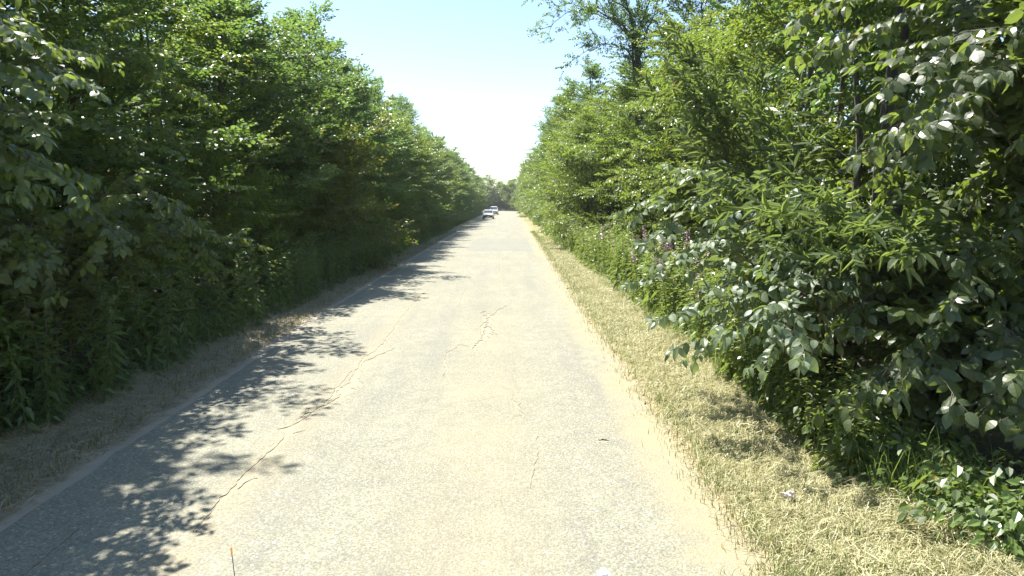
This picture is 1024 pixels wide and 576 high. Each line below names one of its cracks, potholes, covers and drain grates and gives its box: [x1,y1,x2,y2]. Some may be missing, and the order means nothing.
crack [530,436,539,489]
crack [192,289,429,533]
crack [443,291,506,376]
crack [22,527,81,576]
